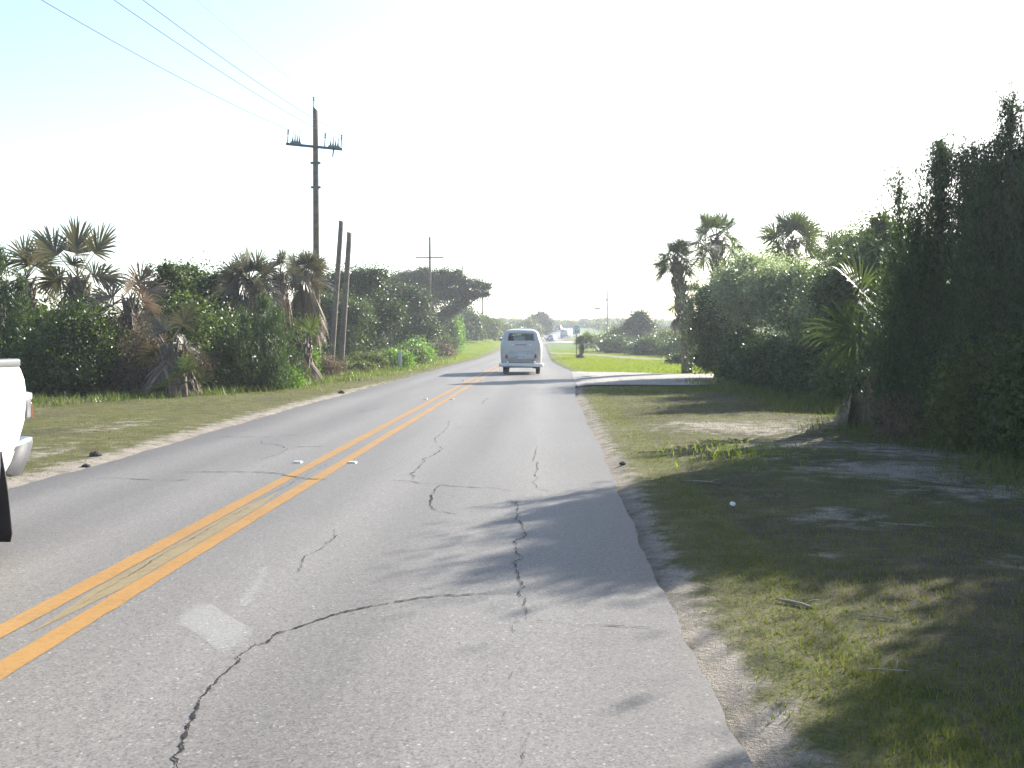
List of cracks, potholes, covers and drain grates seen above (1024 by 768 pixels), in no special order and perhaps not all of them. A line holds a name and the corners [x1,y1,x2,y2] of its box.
crack [100,434,327,480]
crack [172,593,482,768]
crack [400,429,653,631]
